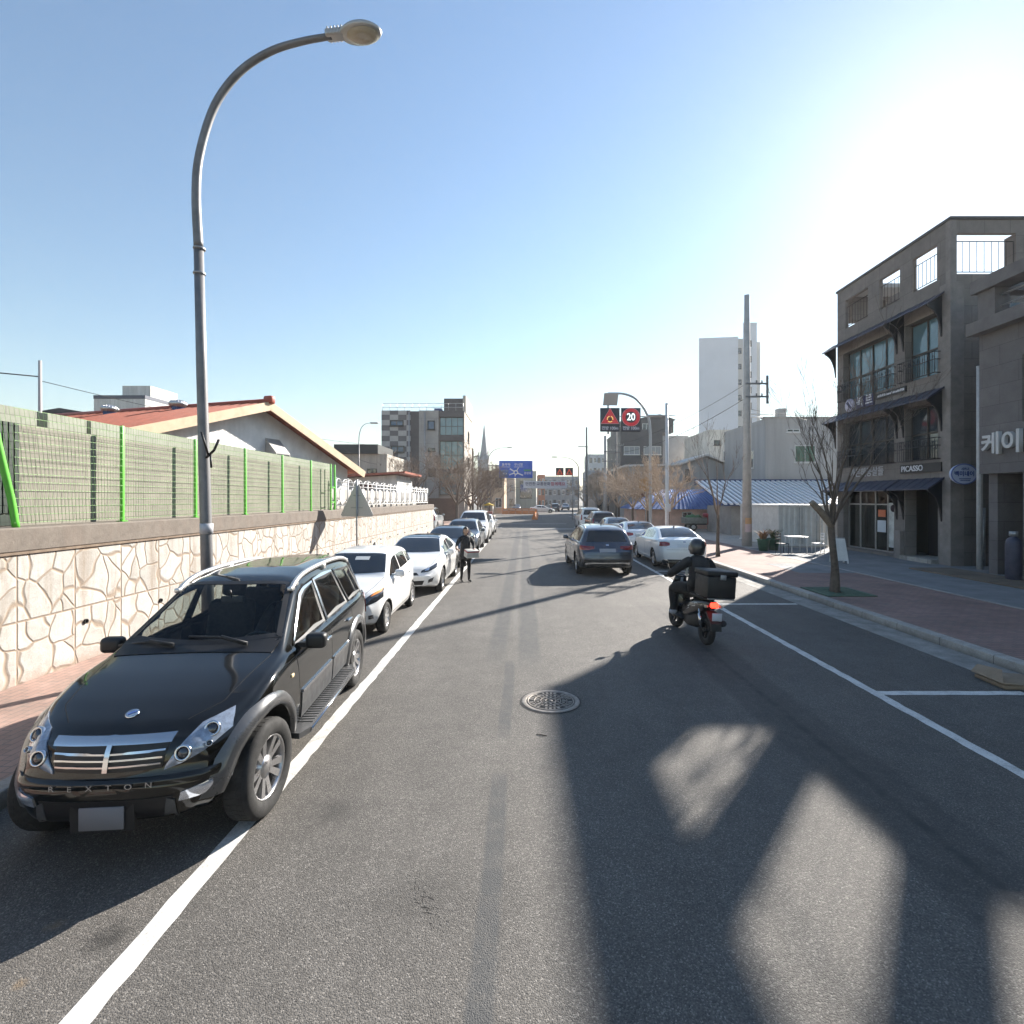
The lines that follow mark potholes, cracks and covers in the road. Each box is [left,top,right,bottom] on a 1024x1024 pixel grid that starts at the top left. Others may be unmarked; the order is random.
manhole cover [520,690,581,714]
crack [400,874,445,928]
